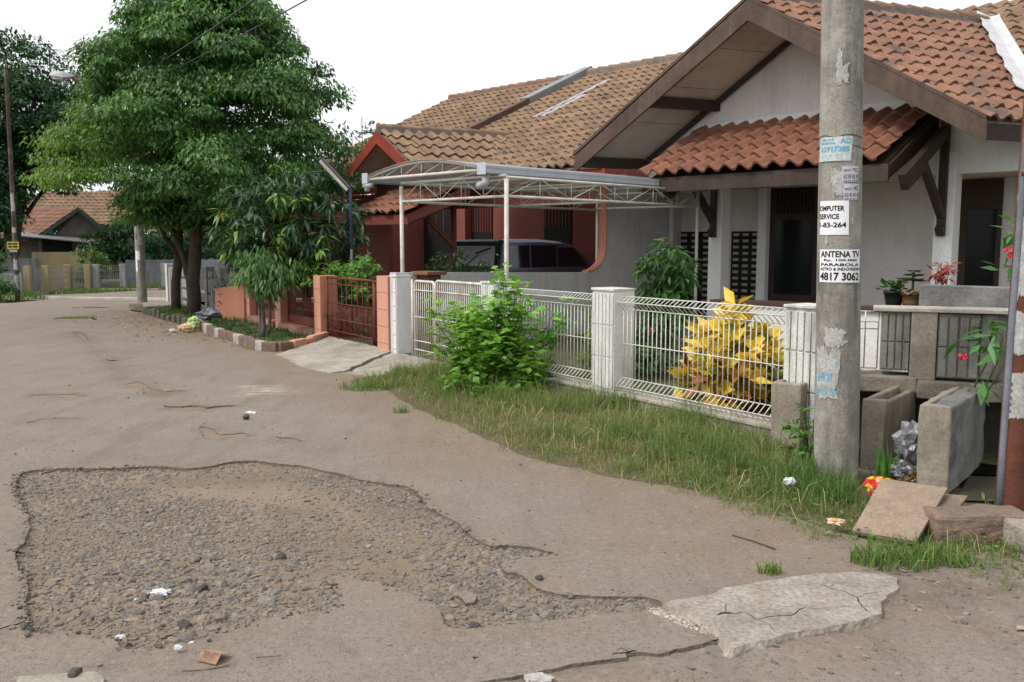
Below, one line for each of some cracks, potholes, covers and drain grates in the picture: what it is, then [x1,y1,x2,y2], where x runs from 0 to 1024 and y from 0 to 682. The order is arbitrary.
pothole [199,426,248,439]
pothole [15,460,663,649]
crack [717,582,876,630]
pothole [127,382,186,396]
